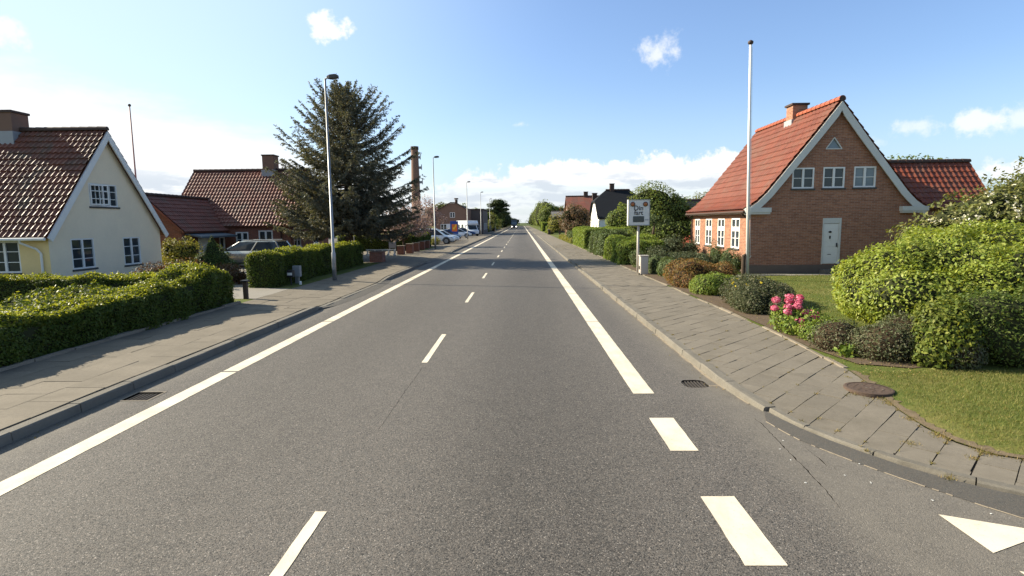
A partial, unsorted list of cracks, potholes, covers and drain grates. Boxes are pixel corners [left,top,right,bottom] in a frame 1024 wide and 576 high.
drain grate [118,391,168,401]
manhole cover [843,382,895,399]
crack [758,421,838,505]
drain grate [681,380,709,388]
